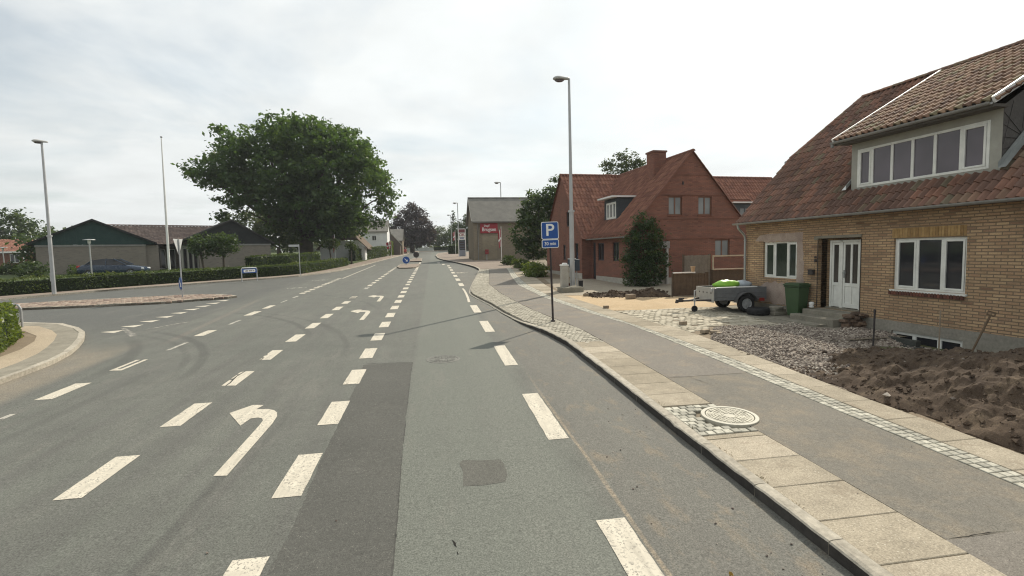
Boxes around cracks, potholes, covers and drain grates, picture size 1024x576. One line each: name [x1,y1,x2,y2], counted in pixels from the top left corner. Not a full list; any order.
manhole cover [426,355,460,363]
manhole cover [701,406,760,429]
